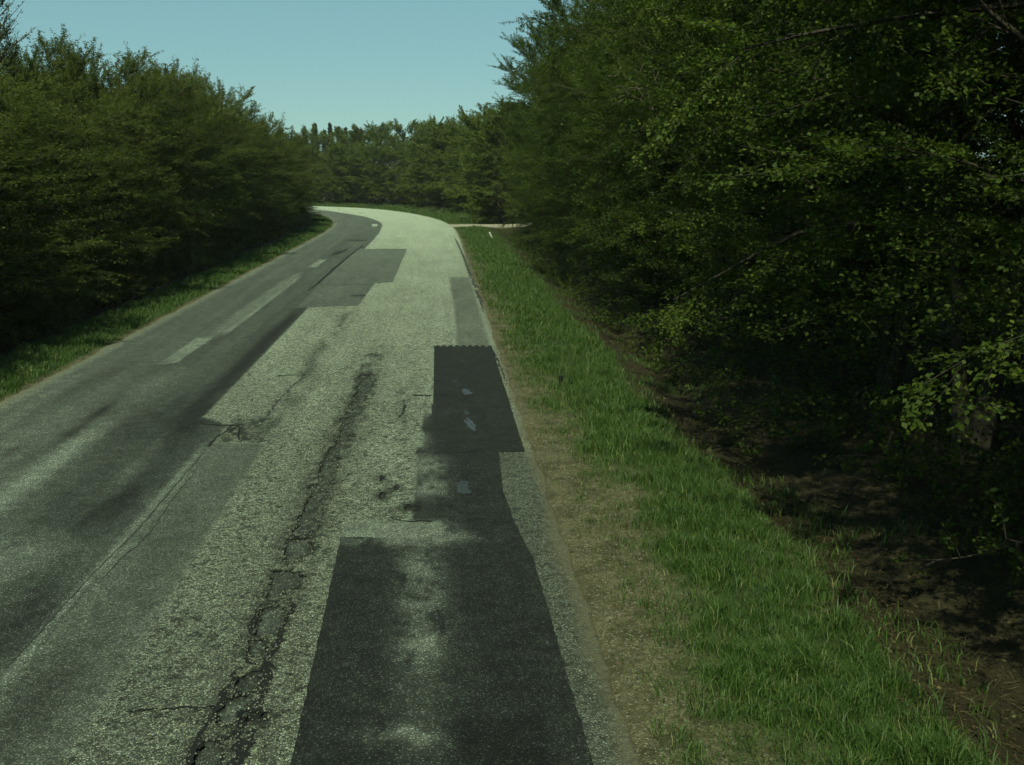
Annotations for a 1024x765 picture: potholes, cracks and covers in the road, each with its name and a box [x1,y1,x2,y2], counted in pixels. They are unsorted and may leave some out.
crack [127,600,297,765]
crack [261,374,304,421]
crack [201,423,242,447]
